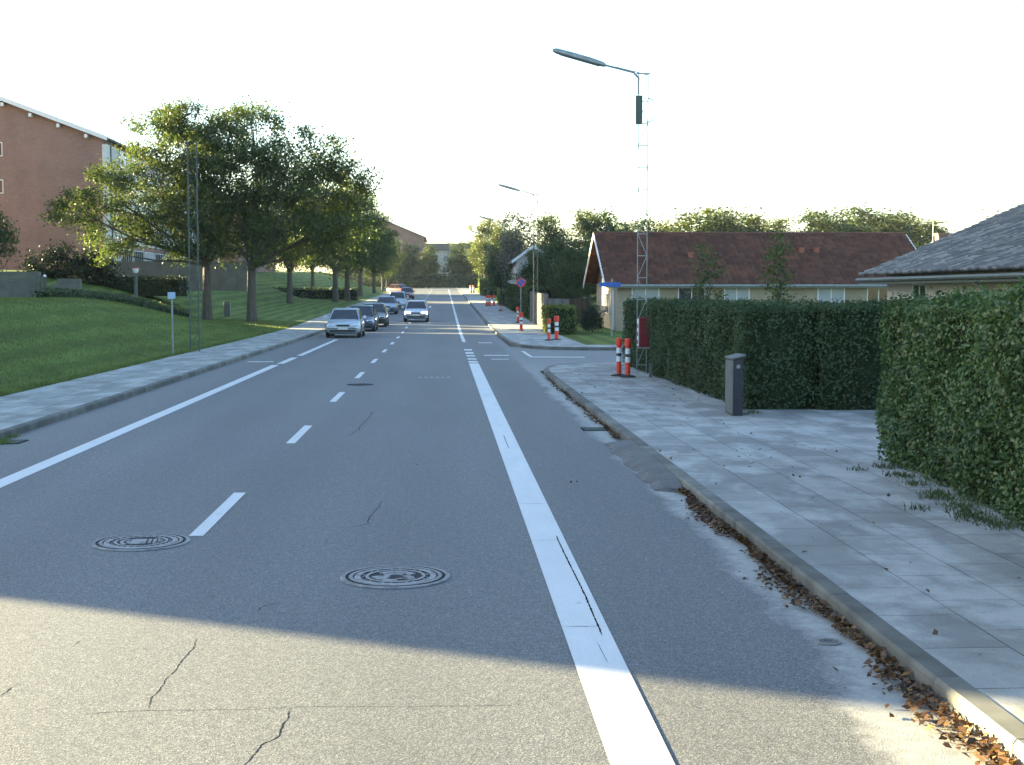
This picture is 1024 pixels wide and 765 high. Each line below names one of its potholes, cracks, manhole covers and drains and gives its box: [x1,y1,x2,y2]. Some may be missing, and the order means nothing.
manhole cover [340,565,451,589]
crack [88,639,525,765]
manhole cover [90,533,191,551]
